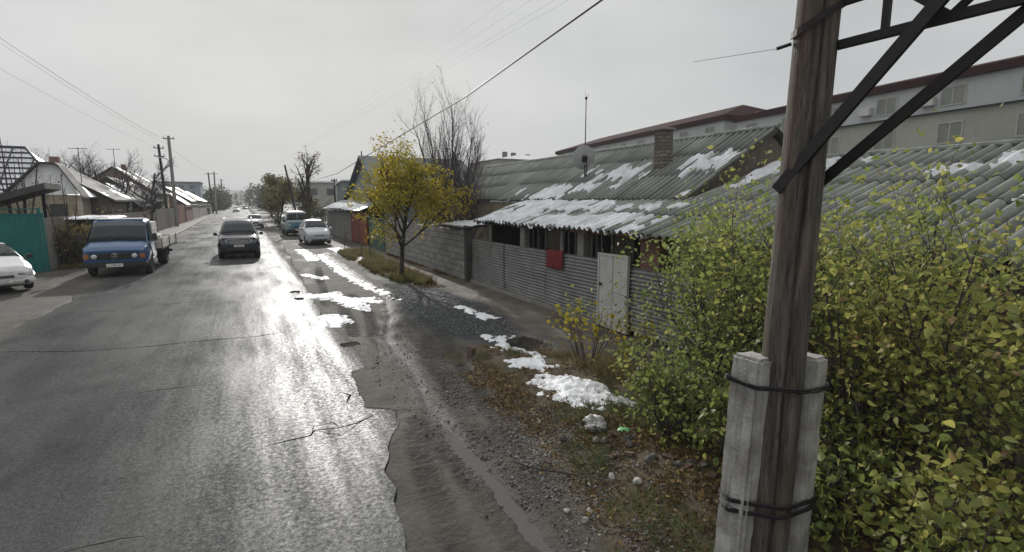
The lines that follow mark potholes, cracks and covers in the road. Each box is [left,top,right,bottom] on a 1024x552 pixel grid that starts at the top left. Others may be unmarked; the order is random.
crack [270,393,377,446]
crack [28,333,278,352]
